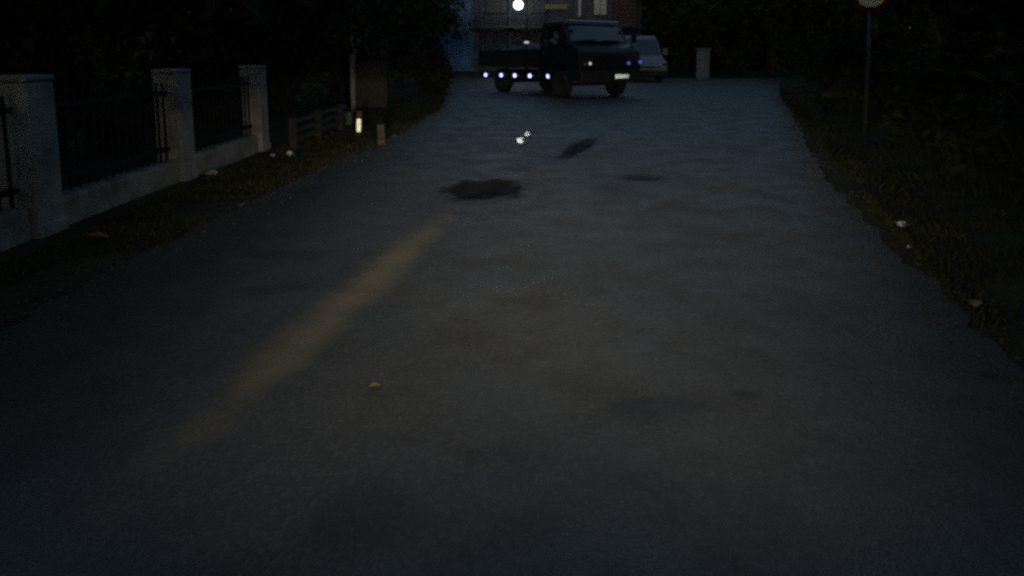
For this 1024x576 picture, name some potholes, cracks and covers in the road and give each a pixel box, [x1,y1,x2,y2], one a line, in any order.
pothole [558,137,598,160]
pothole [447,181,524,200]
